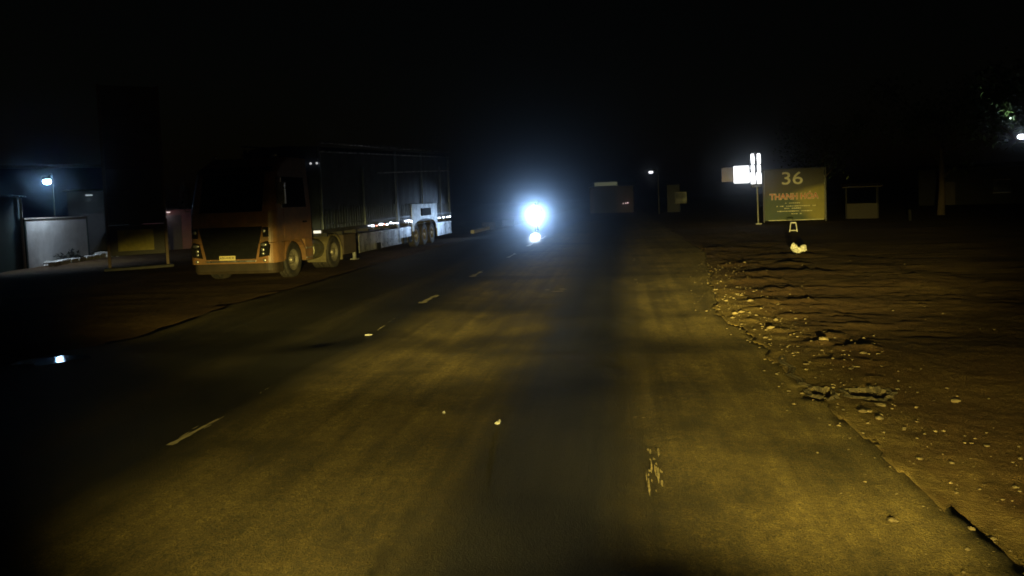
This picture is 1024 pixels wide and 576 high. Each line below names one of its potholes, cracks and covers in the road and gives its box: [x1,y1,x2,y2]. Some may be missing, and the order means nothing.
pothole [837,385,898,402]
pothole [802,385,840,401]
crack [778,355,813,387]
